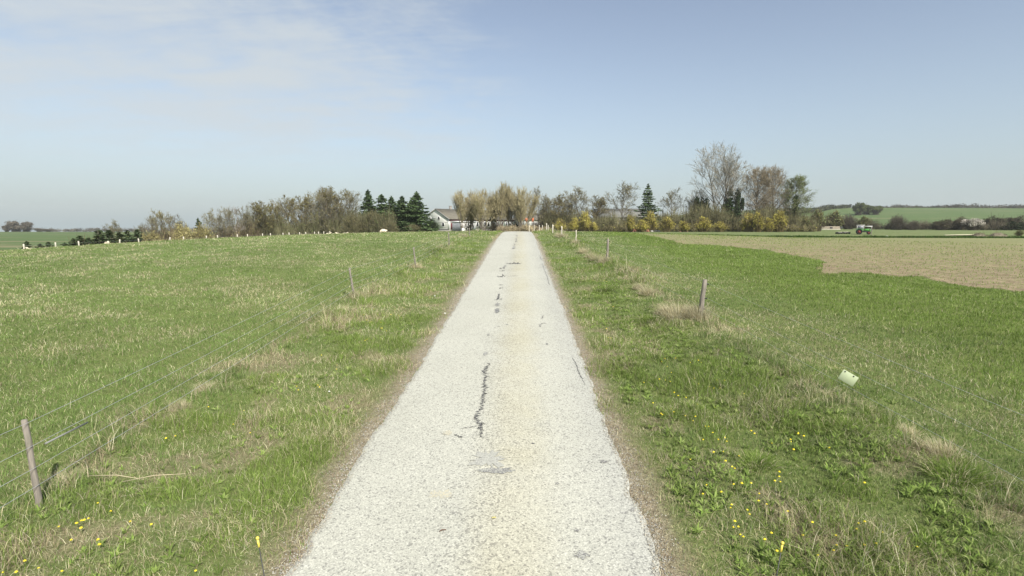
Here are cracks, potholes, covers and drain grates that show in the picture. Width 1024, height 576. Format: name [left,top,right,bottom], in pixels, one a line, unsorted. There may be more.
crack [496,235,520,300]
crack [454,363,490,438]
